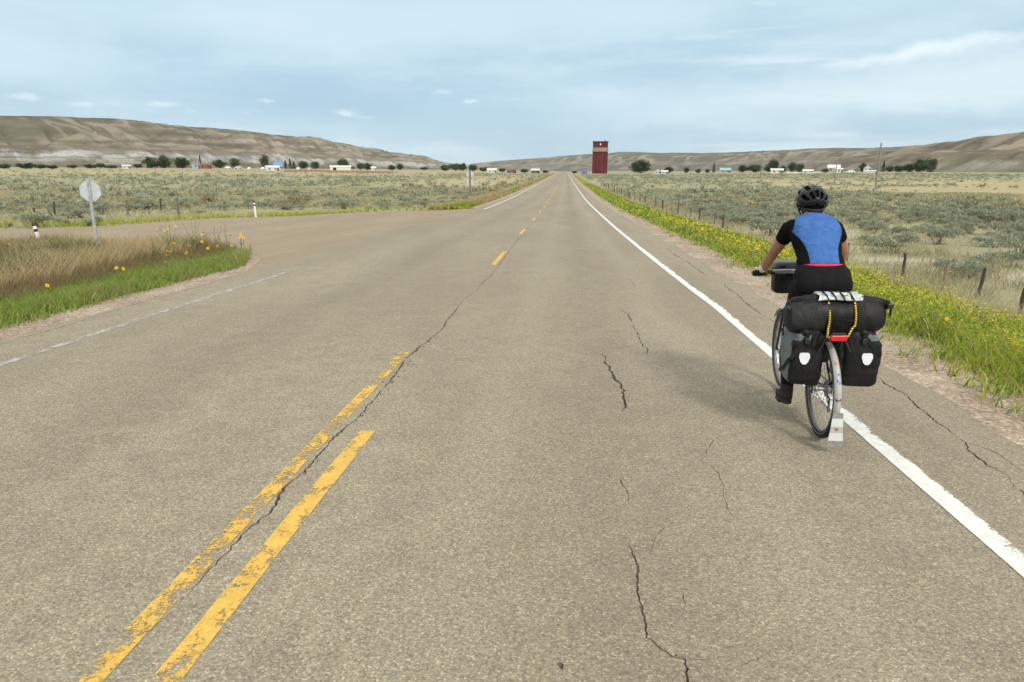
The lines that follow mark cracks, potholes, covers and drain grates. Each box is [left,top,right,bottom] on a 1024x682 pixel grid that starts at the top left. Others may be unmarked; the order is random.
crack [601,308,648,411]
crack [629,522,709,682]
crack [877,377,1024,495]
